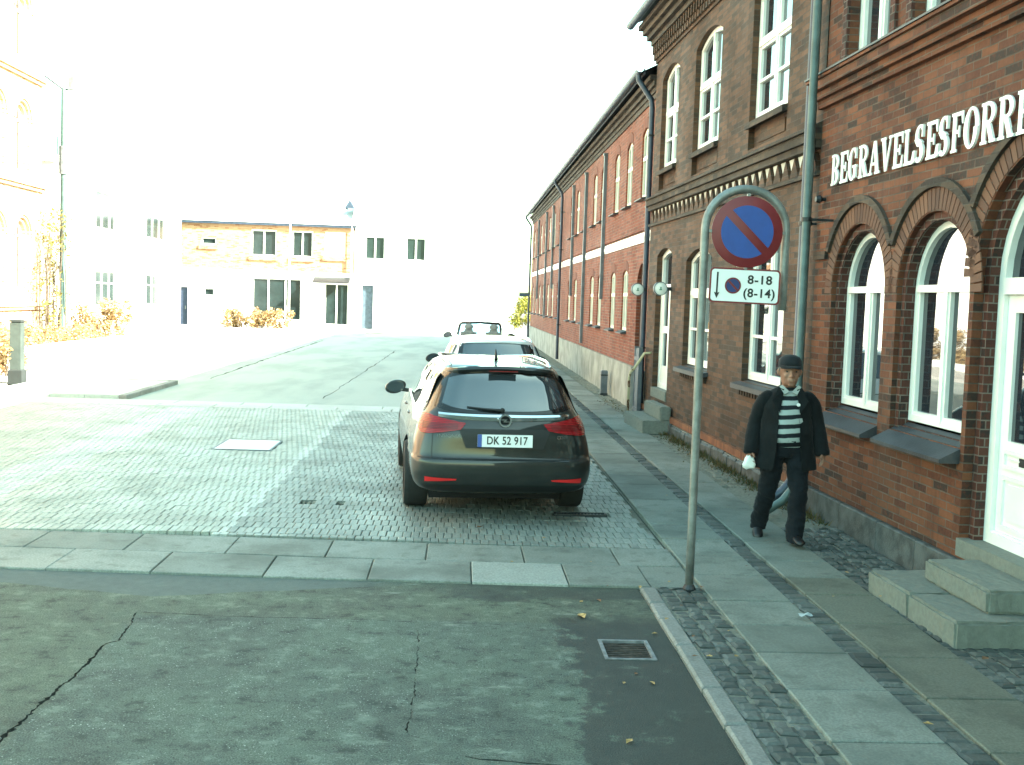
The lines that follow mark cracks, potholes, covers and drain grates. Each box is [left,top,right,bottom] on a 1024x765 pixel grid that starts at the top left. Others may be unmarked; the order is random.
crack [0,612,440,750]
drain grate [598,639,657,661]
manhole cover [211,439,283,451]
